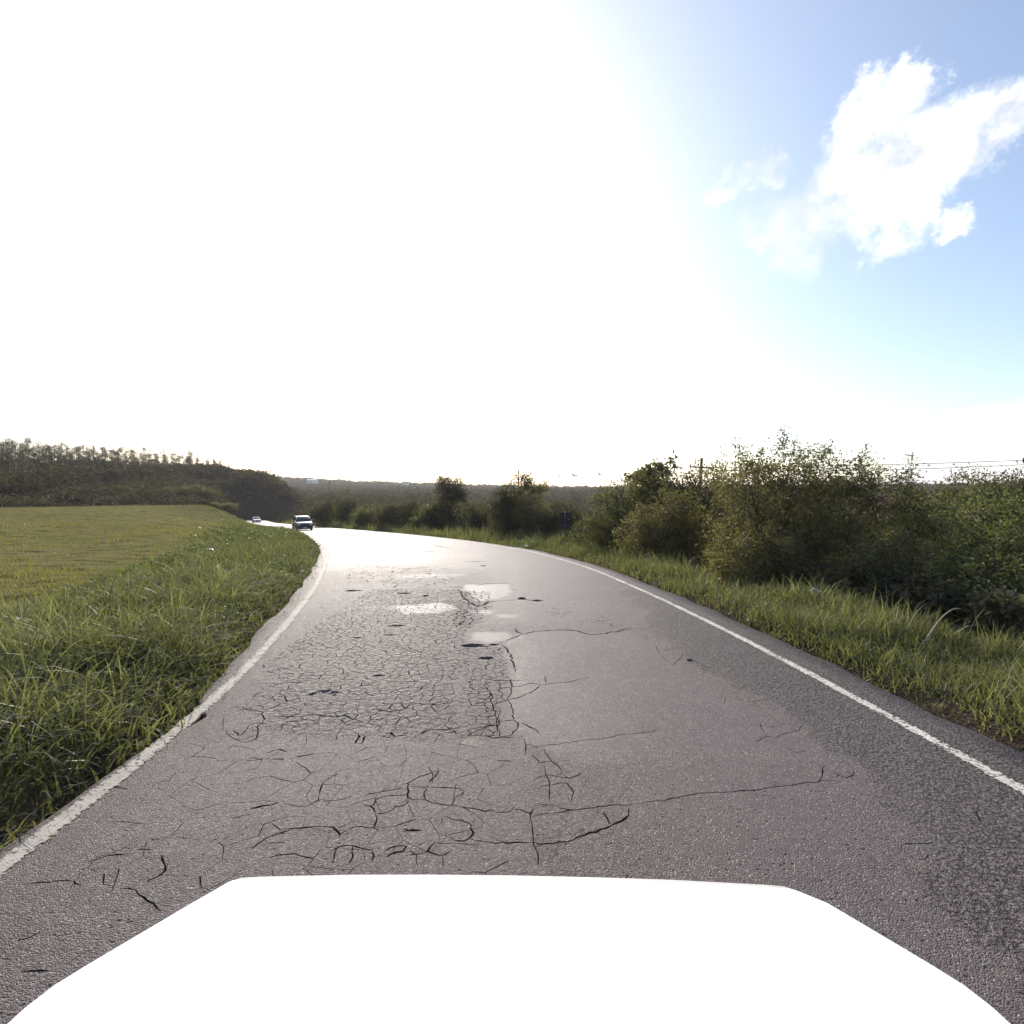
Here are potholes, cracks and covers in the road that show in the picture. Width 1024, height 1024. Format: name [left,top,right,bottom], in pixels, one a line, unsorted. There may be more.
crack [18,545,854,973]
